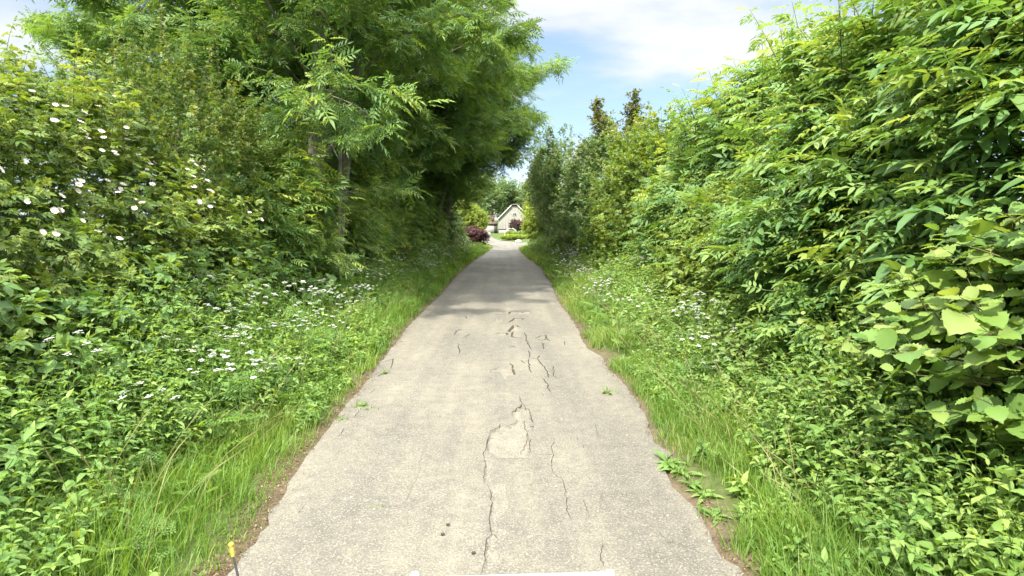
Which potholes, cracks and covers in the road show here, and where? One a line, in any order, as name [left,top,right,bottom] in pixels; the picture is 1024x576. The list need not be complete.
crack [480,311,603,575]
pothole [486,404,533,458]
